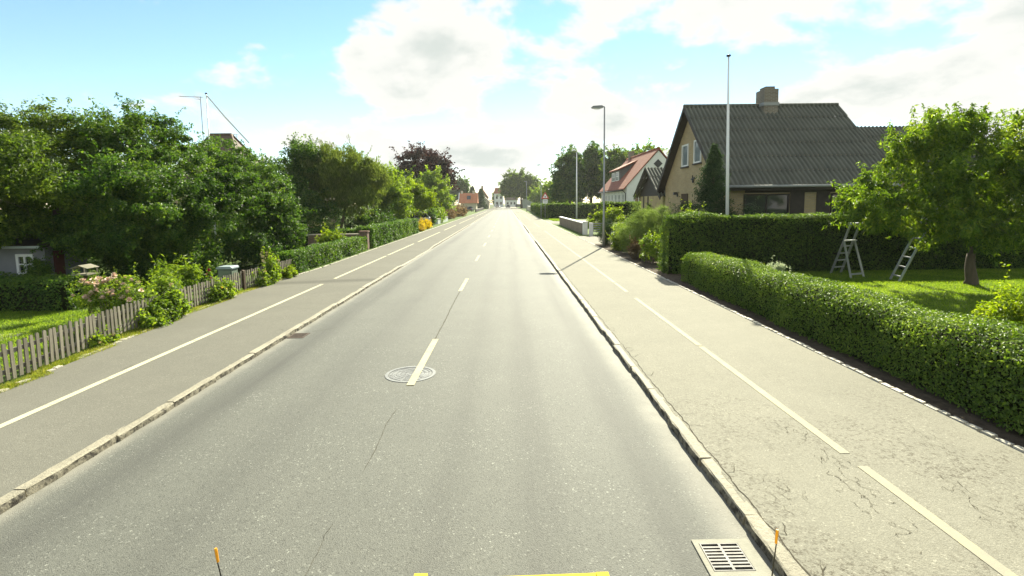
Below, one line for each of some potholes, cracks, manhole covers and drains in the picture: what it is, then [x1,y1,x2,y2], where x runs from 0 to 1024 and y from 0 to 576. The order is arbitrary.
drain grate [691,539,772,576]
crack [775,423,922,554]
manhole cover [385,366,436,383]
